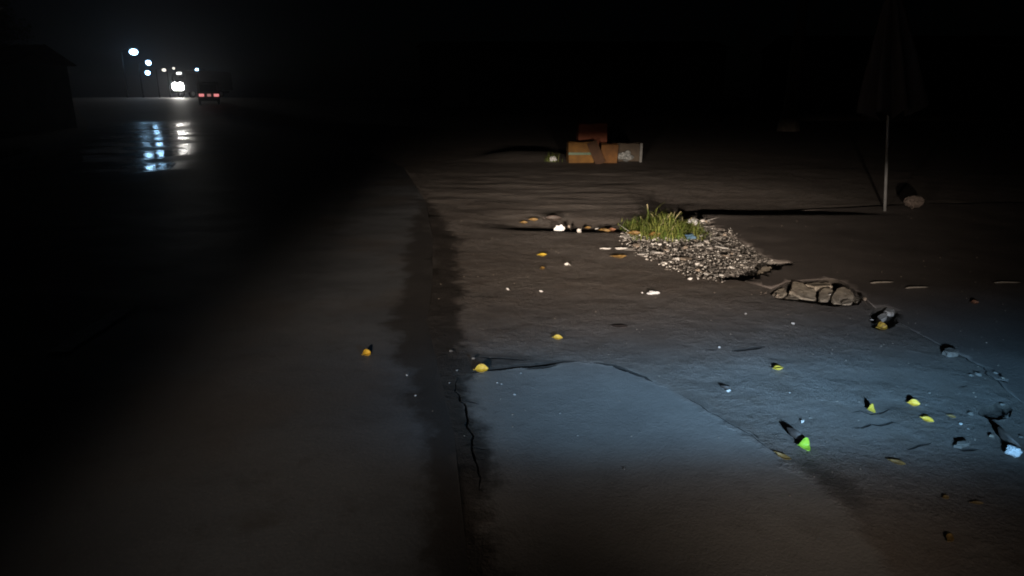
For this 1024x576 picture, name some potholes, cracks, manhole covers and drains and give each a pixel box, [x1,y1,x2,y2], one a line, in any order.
crack [454,357,653,491]
crack [904,327,1008,393]
pothole [630,218,790,282]
